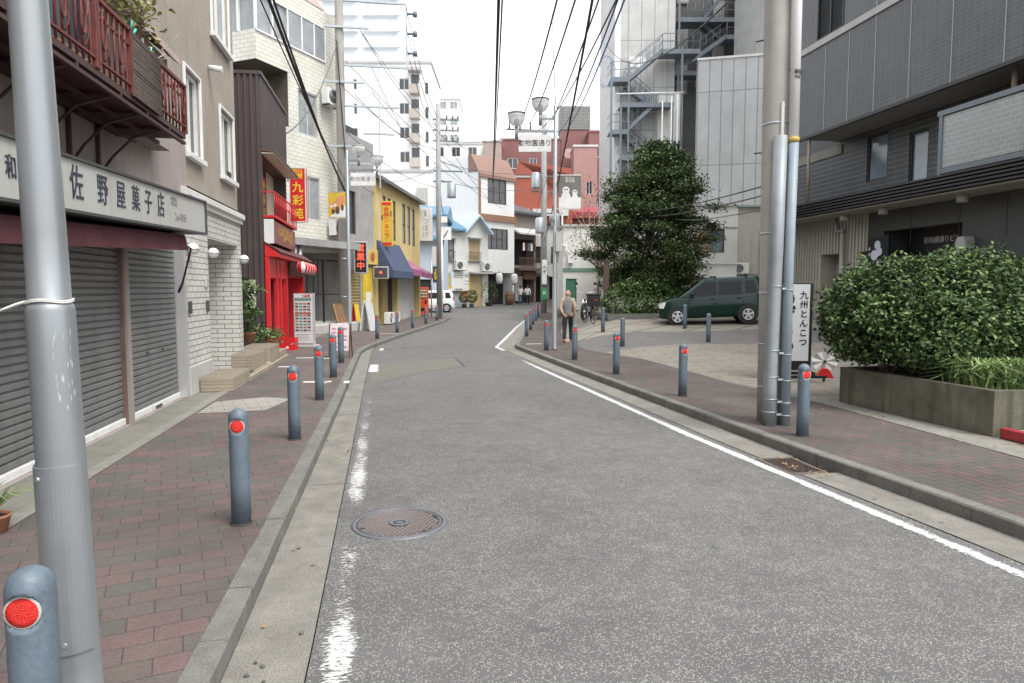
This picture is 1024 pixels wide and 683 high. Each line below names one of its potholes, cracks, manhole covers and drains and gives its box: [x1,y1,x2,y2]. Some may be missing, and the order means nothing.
manhole cover [351,507,447,540]
drain grate [756,457,826,477]
